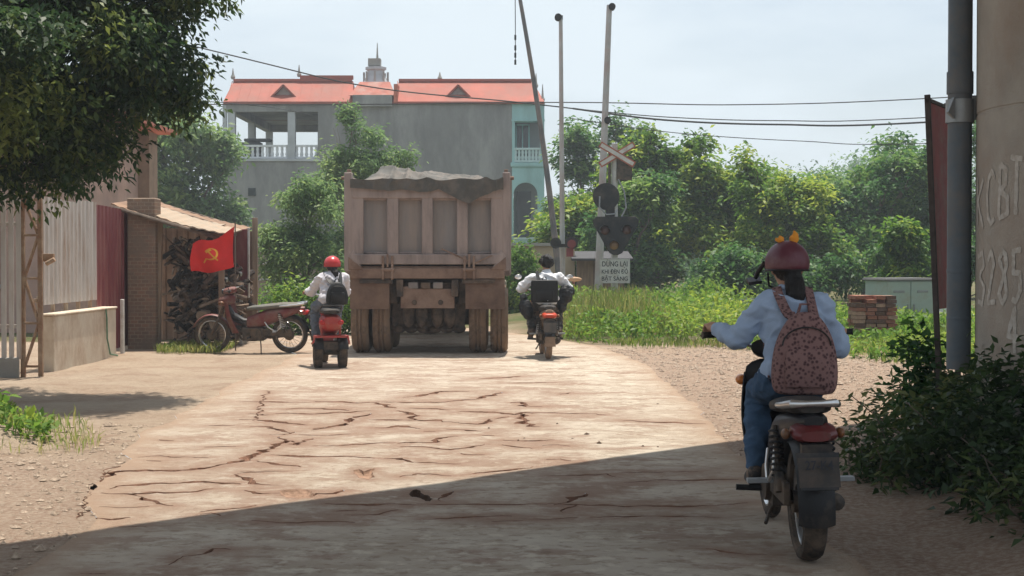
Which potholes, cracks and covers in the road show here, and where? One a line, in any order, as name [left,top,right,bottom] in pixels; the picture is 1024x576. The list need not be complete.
pothole [353,468,375,480]
pothole [279,489,315,499]
pothole [409,489,432,501]
crack [76,391,748,527]
crack [169,548,231,565]
